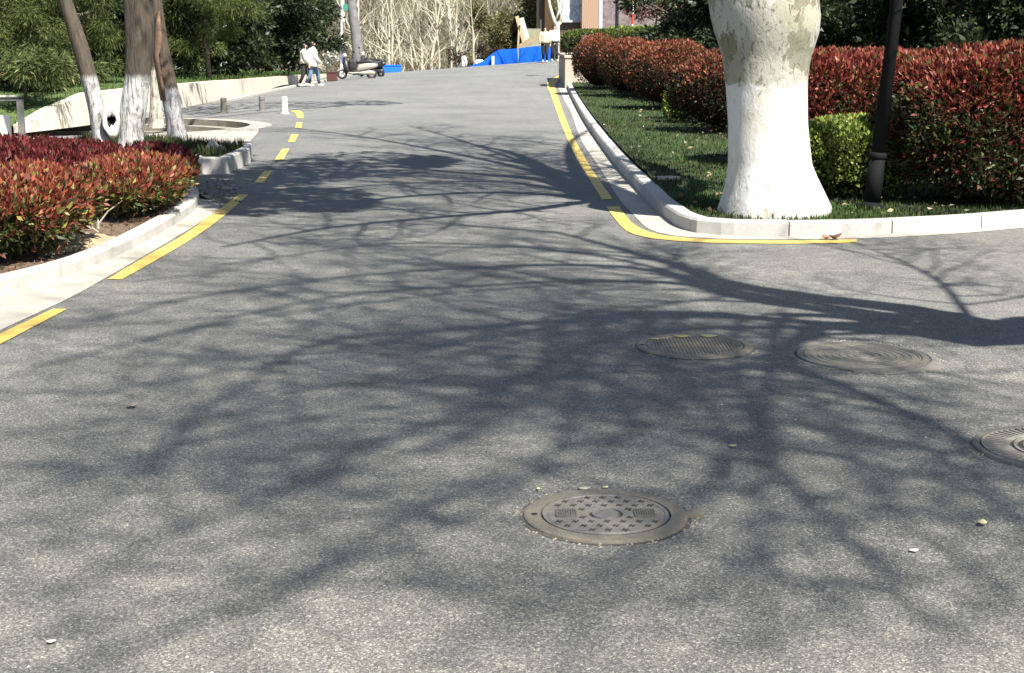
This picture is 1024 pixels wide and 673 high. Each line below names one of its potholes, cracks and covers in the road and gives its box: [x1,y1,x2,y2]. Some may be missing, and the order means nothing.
manhole cover [781,339,947,375]
manhole cover [970,425,1024,468]
manhole cover [515,487,704,548]
manhole cover [632,333,758,360]
